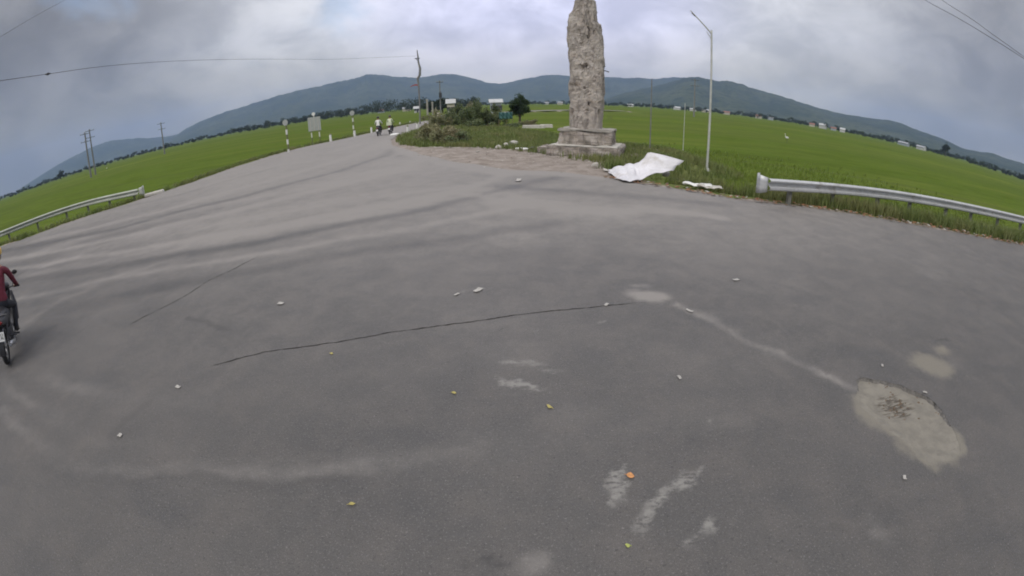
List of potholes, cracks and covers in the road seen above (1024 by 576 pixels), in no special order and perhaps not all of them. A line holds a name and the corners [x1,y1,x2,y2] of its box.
crack [204,302,640,368]
pothole [856,378,960,464]
